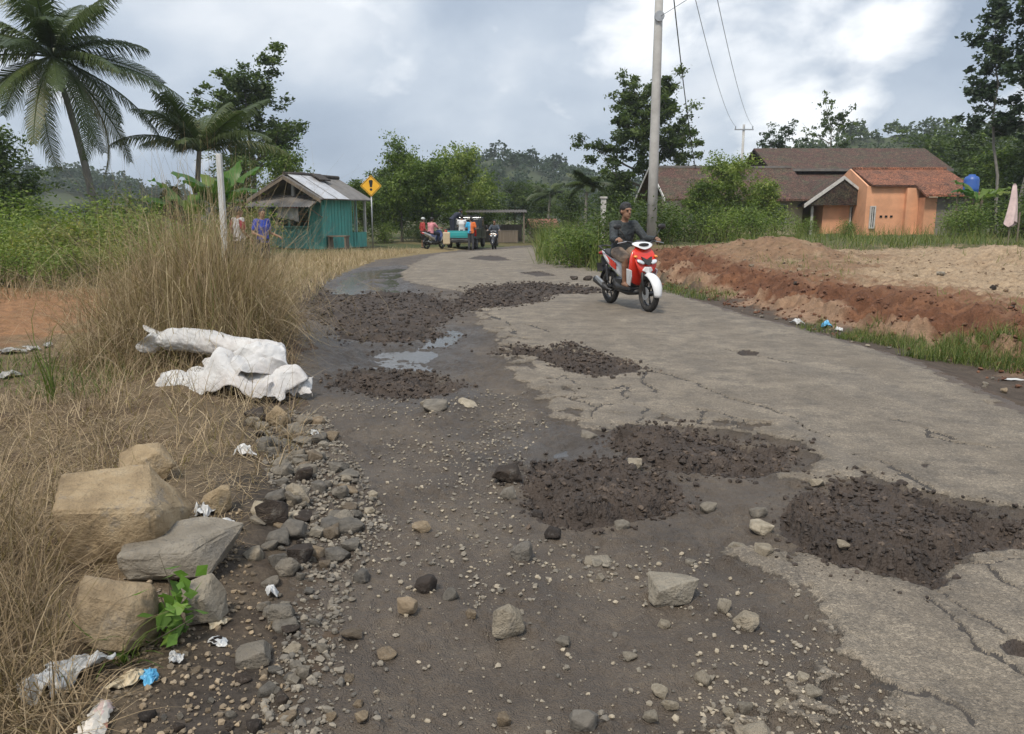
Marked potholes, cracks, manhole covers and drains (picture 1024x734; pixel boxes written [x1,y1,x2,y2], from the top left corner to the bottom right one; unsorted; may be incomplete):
pothole [294,280,483,356]
pothole [1001,639,1024,657]
pothole [588,419,816,485]
pothole [754,465,1024,603]
pothole [319,366,478,404]
pothole [435,281,613,316]
crack [973,558,1021,588]
pothole [470,339,662,379]
crack [928,593,1024,675]
